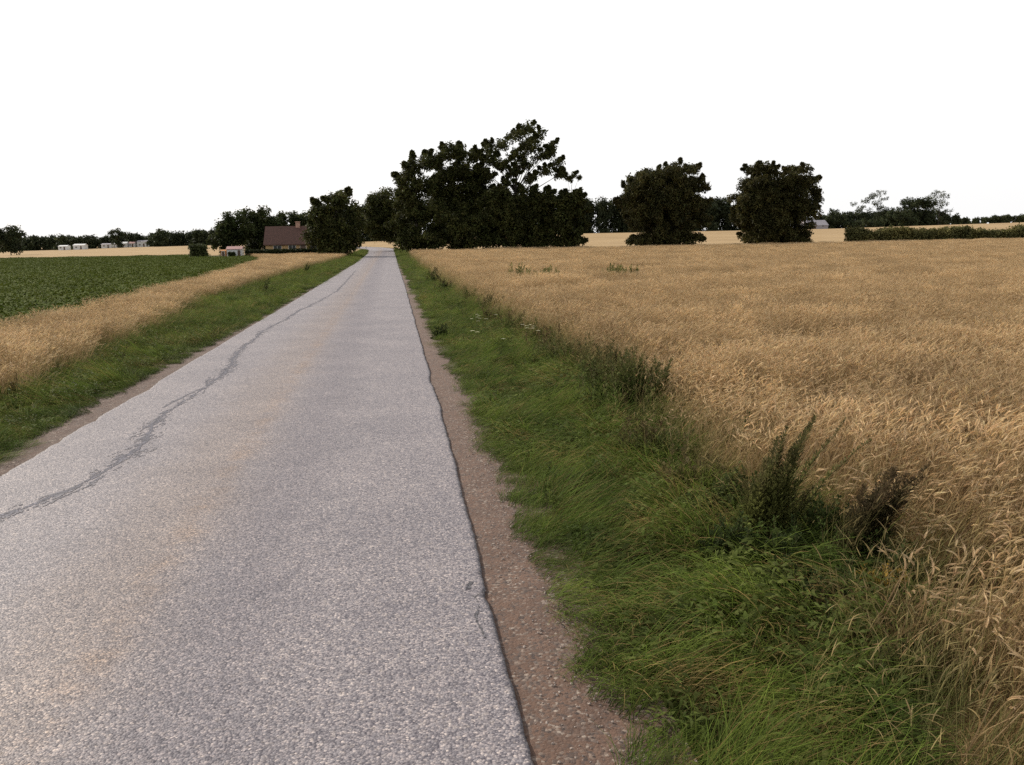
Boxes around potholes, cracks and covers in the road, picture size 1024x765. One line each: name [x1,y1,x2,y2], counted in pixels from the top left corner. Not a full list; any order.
crack [466,581,486,637]
crack [0,274,354,521]
